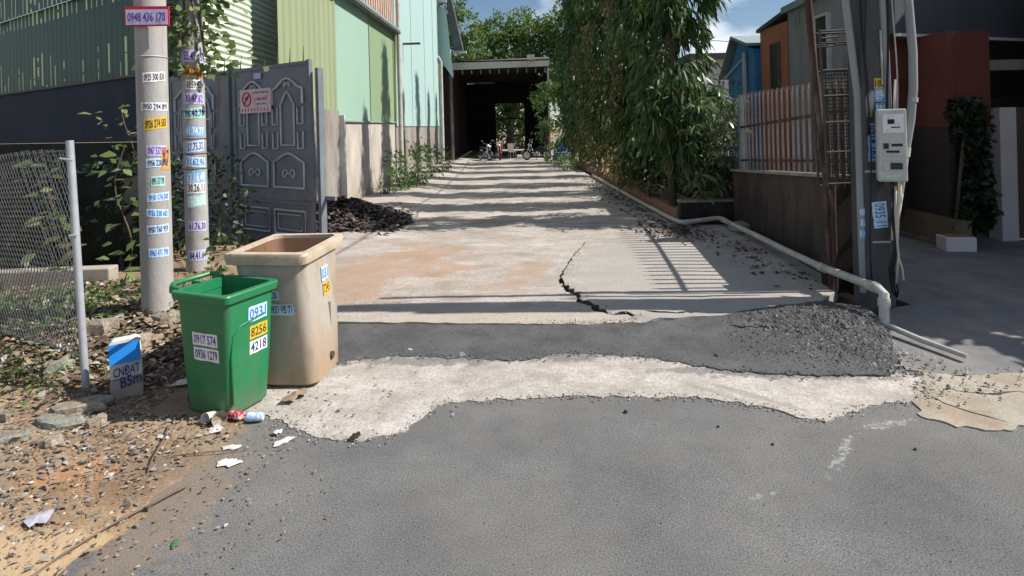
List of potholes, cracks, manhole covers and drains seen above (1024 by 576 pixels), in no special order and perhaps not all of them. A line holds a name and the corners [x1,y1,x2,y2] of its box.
crack [558,242,693,316]
